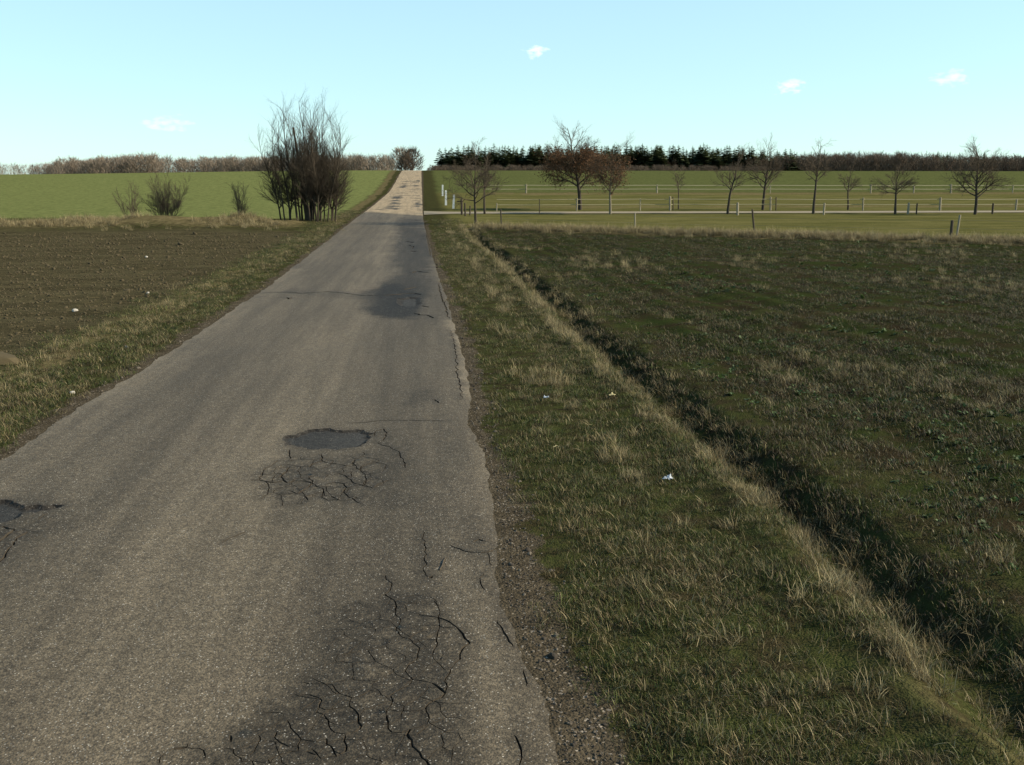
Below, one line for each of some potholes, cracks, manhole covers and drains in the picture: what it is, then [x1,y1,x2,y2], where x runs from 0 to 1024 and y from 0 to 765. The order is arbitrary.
crack [251,420,437,506]
pothole [282,428,374,450]
crack [514,735,523,765]
crack [199,575,471,765]
pothole [0,499,67,523]
crack [0,513,48,562]
crack [422,532,433,578]
crack [450,539,514,647]
crack [159,743,206,764]
